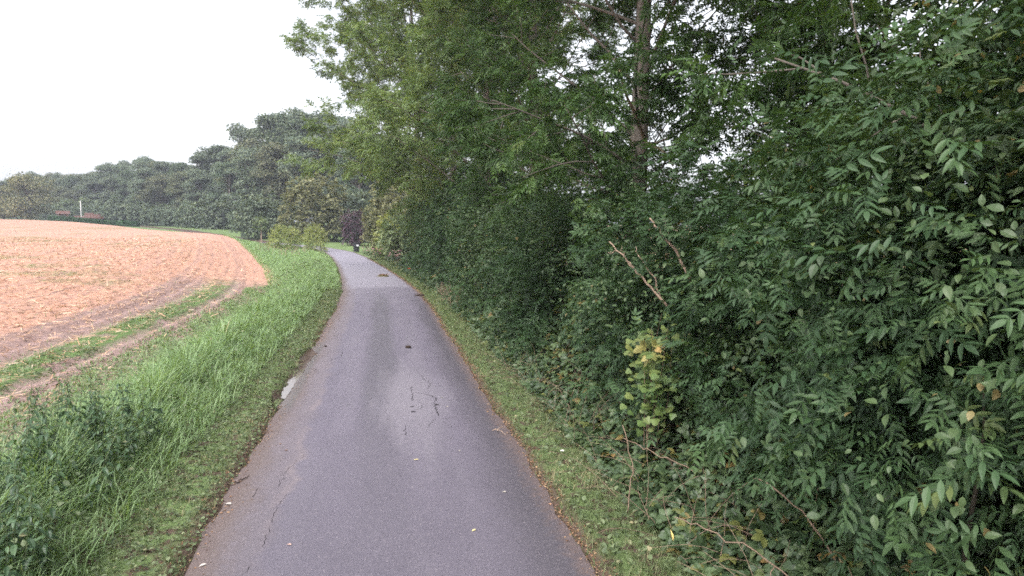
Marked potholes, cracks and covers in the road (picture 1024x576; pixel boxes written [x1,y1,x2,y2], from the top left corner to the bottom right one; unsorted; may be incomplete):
crack [405,359,456,435]
